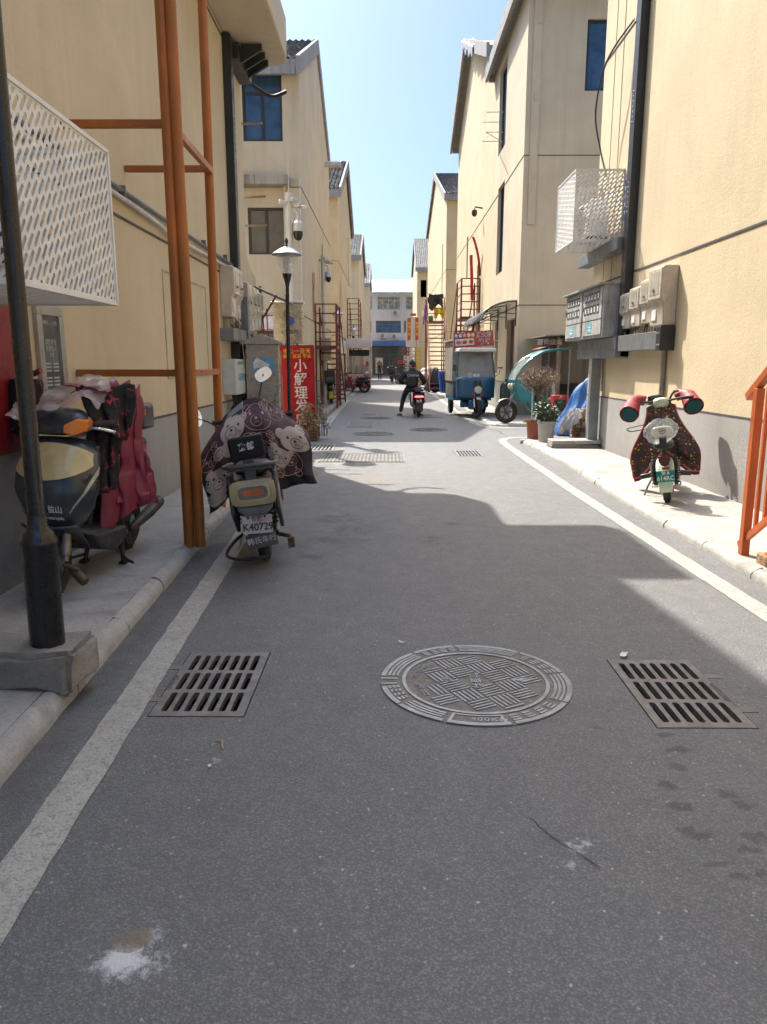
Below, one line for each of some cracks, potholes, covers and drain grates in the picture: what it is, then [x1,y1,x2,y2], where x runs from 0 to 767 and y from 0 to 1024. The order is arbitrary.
crack [526,817,600,868]
drain grate [147,652,270,717]
drain grate [607,660,759,729]
manhole cover [380,645,573,728]
